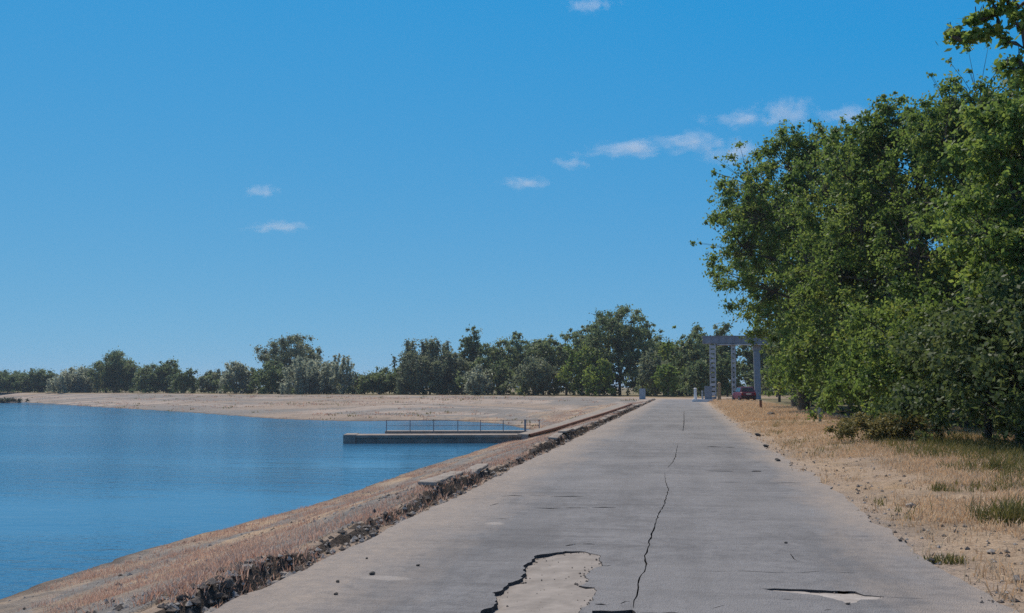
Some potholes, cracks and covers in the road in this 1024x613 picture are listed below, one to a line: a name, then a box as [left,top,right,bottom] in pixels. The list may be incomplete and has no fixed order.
pothole [767,588,883,603]
pothole [480,551,602,613]
crack [596,444,731,613]
